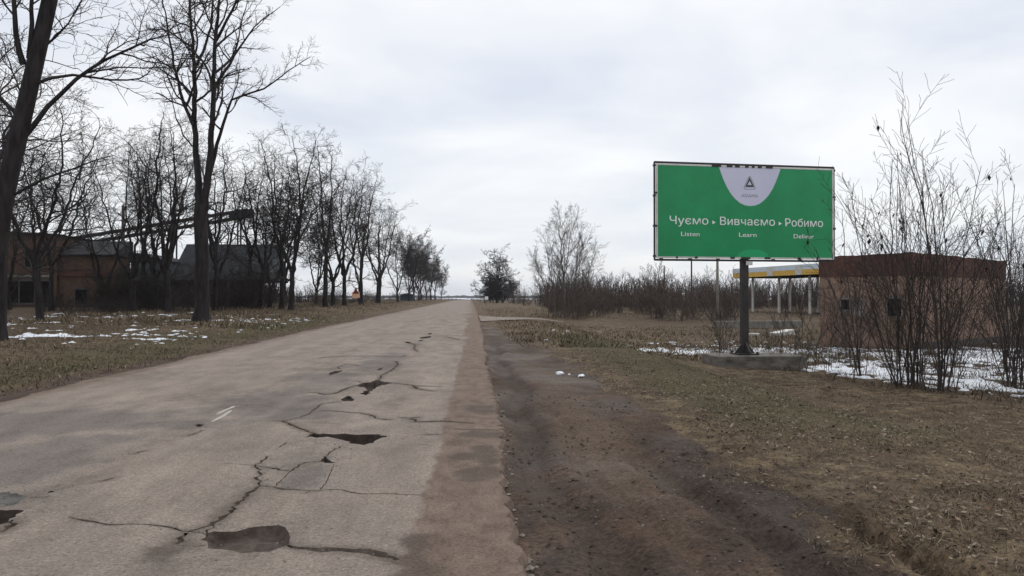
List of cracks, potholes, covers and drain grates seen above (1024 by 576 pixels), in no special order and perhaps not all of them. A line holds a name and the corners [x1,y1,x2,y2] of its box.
pothole [357,380,389,395]
crack [72,344,481,547]
pothole [0,510,24,524]
pothole [201,525,290,553]
pothole [307,433,387,445]
crack [289,545,400,560]
